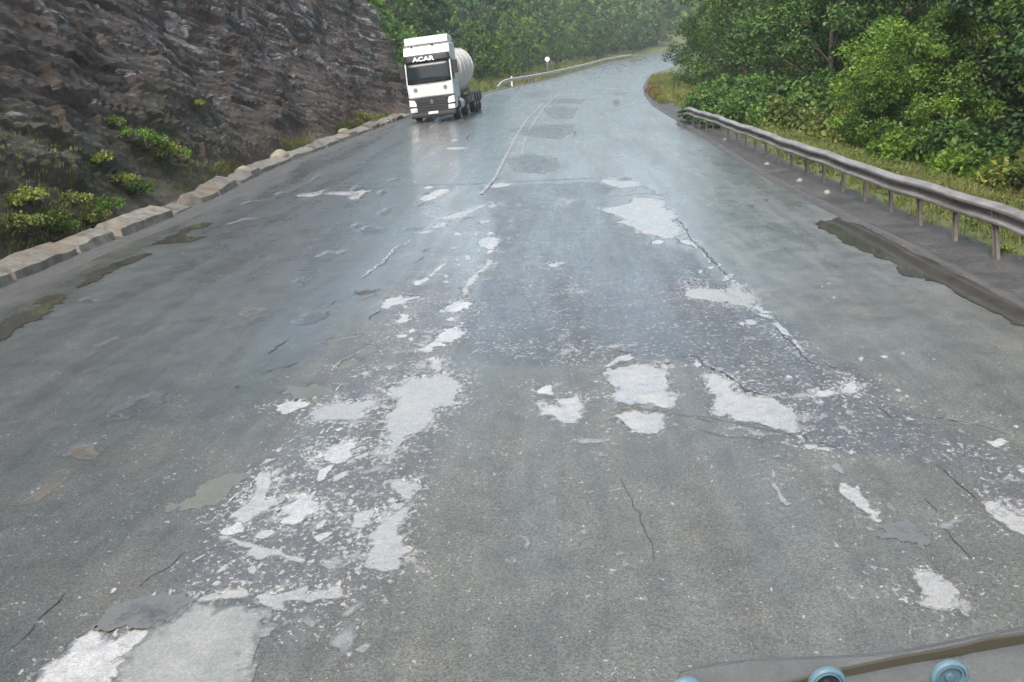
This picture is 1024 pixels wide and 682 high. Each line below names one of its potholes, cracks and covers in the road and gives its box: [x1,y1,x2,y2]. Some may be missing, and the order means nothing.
pothole [701,370,807,433]
crack [12,593,64,647]
crack [675,218,729,276]
crack [362,239,429,278]
crack [621,479,655,560]
crack [925,463,981,511]
pothole [602,197,685,239]
pothole [602,363,681,409]
pothole [381,373,464,462]
